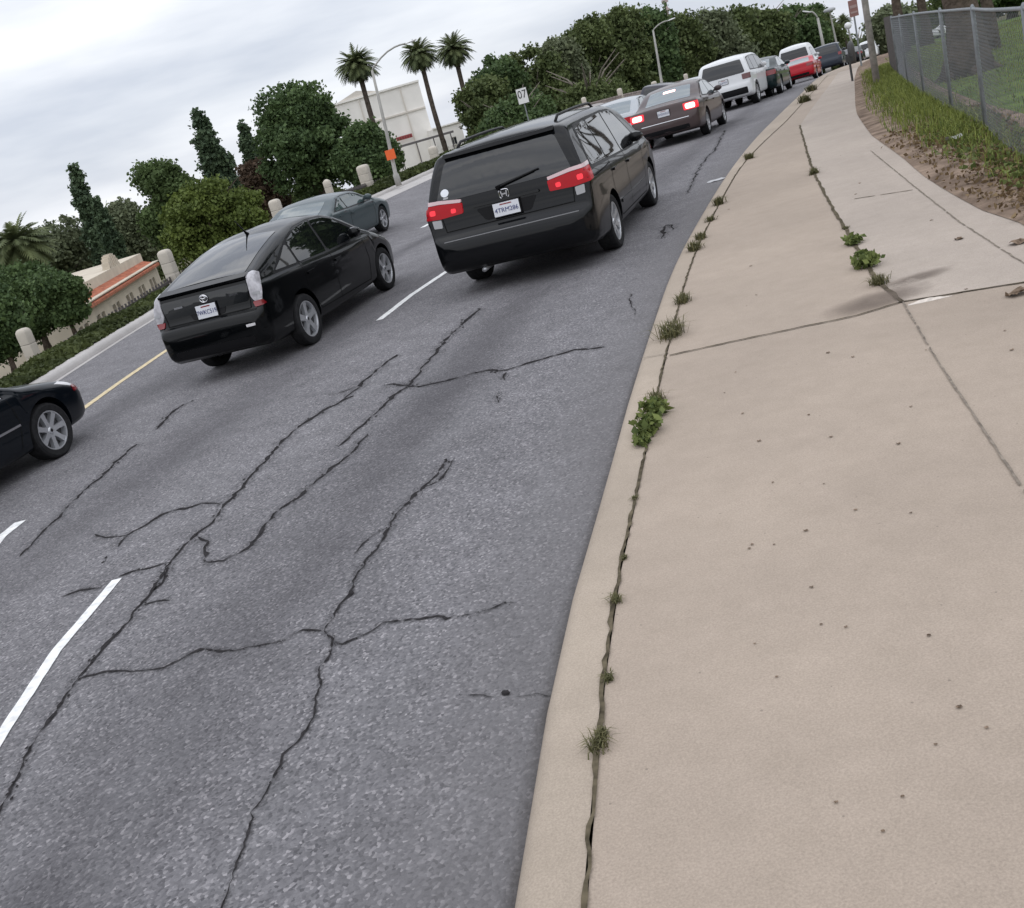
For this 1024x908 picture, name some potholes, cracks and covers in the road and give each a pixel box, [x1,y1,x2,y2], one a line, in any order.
crack [687,130,725,192]
crack [0,308,600,908]
